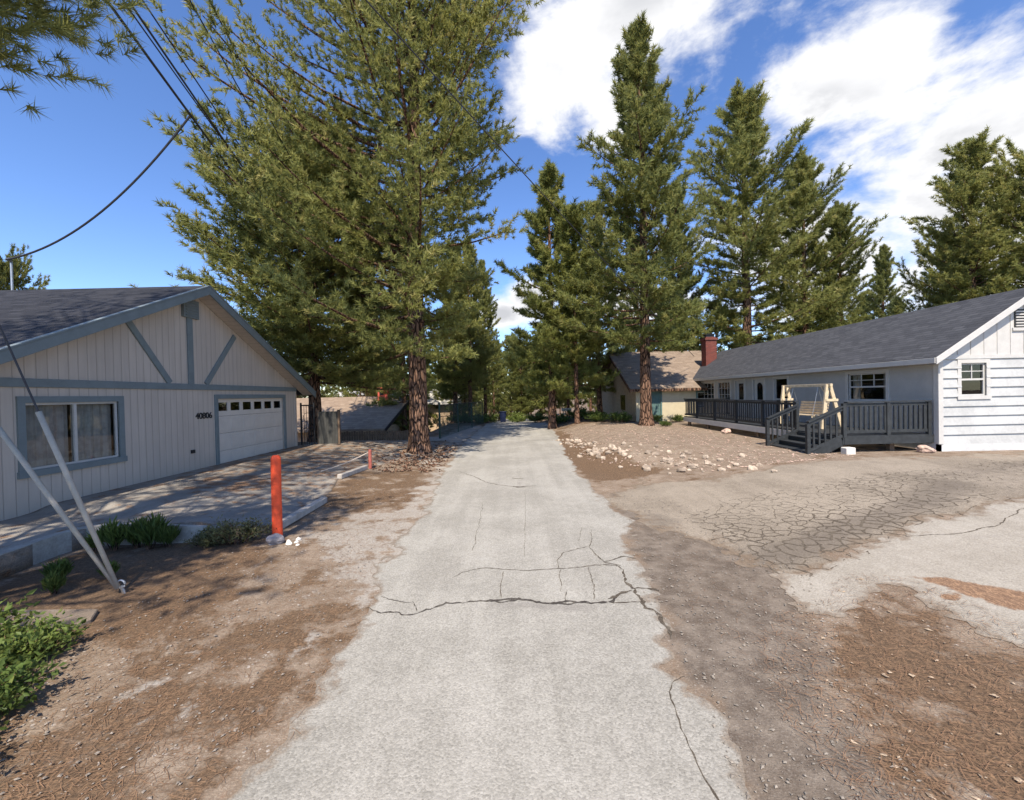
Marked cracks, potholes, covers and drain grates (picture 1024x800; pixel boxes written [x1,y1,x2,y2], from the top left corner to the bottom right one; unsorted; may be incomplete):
crack [368,530,672,639]
crack [684,459,1024,576]
